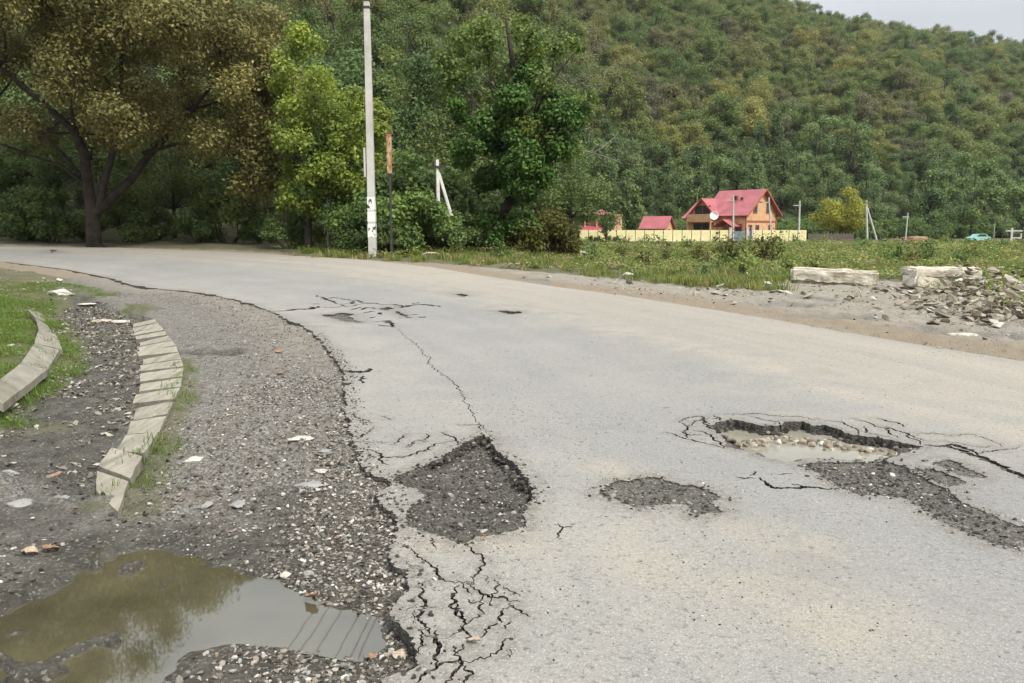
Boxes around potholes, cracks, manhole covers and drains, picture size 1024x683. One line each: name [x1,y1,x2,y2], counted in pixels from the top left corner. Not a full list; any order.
crack [735,471,838,490]
pothole [710,420,923,461]
crack [666,413,950,448]
crack [272,295,490,473]
pothole [394,434,534,544]
pothole [801,461,1024,550]
pothole [598,477,723,516]
